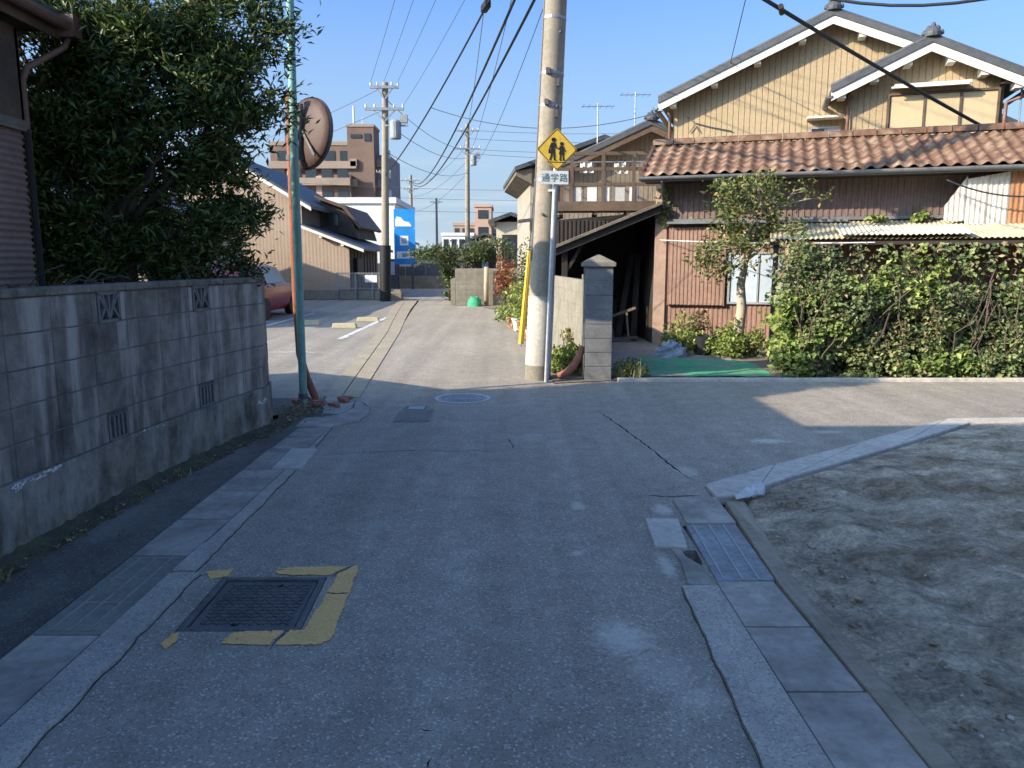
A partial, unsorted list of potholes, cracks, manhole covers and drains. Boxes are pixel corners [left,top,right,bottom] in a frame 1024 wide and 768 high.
drain grate [686,524,775,582]
crack [601,413,695,497]
manhole cover [435,393,491,404]
manhole cover [176,577,326,632]
